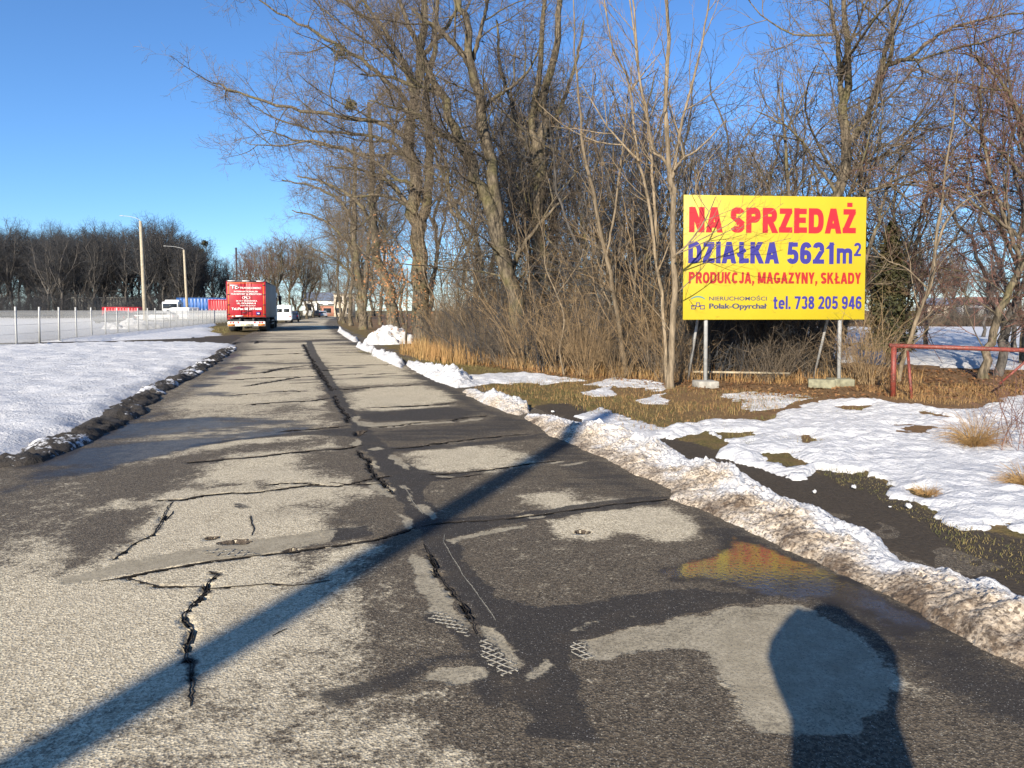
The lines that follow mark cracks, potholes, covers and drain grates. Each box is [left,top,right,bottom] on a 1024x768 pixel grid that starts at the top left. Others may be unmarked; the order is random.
crack [113,476,389,705]
